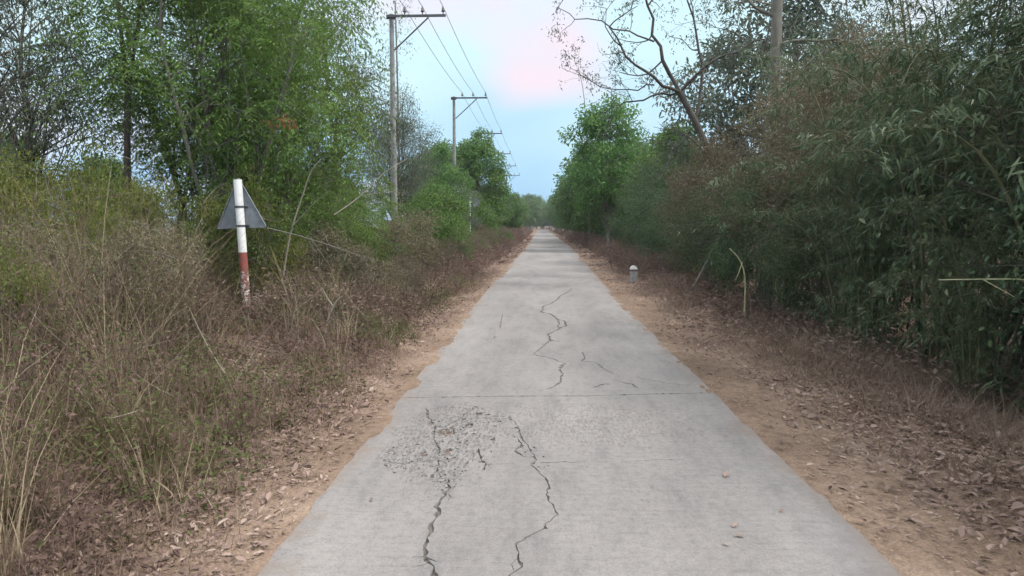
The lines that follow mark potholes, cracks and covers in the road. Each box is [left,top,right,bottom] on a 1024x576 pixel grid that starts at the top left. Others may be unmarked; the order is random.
crack [380,405,647,576]
crack [582,352,680,388]
crack [533,289,572,389]
